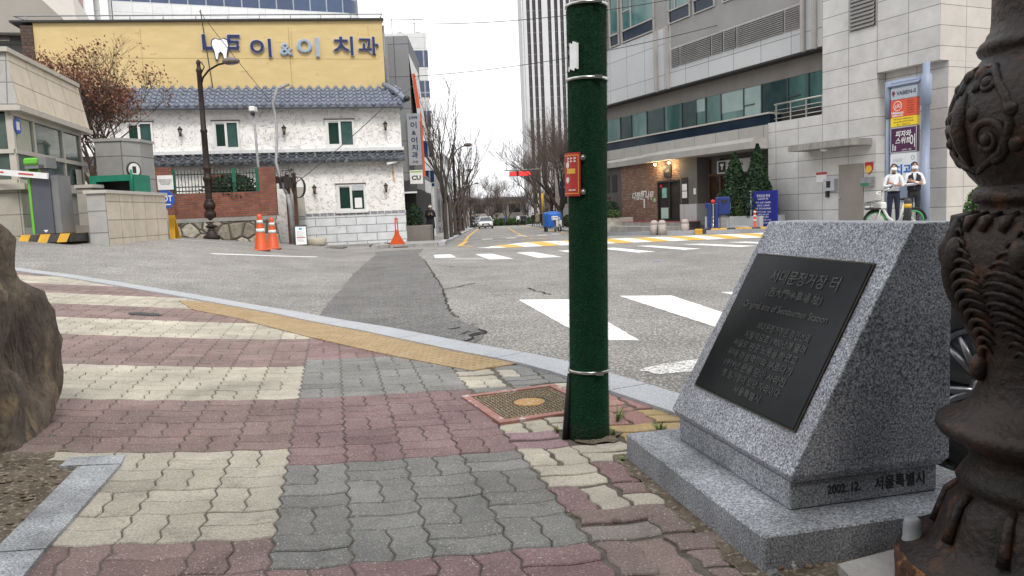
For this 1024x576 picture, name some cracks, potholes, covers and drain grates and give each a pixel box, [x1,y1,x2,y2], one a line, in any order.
crack [425,261,490,341]
manhole cover [461,383,566,426]
